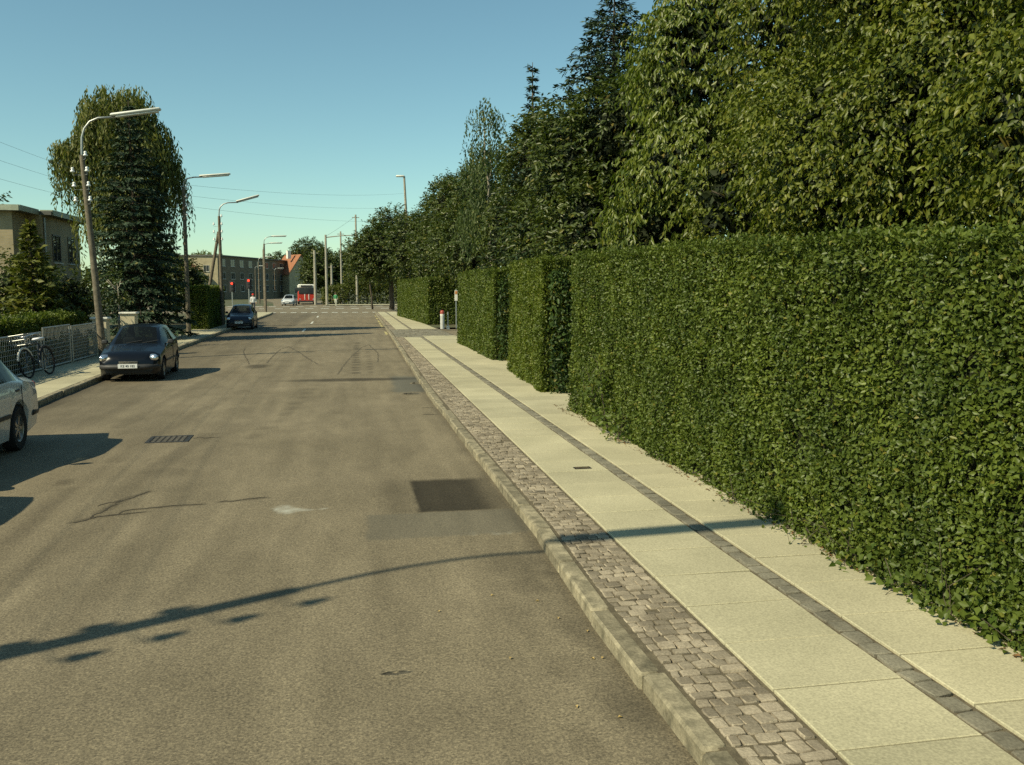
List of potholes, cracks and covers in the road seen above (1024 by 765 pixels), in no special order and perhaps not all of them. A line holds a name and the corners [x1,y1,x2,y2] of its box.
crack [73,491,266,523]
